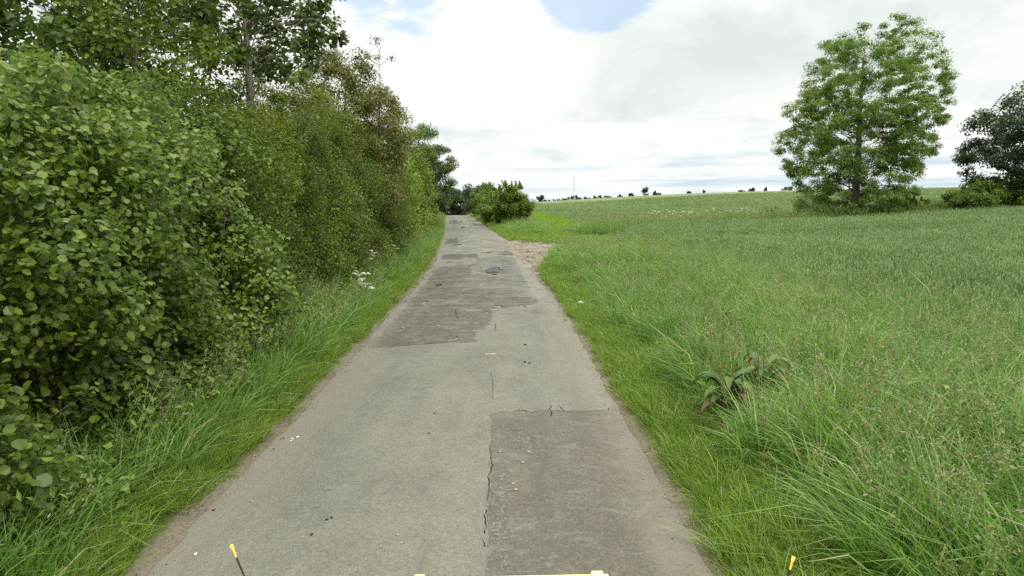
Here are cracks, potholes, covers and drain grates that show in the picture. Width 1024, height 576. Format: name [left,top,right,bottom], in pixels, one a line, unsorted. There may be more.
crack [491,375,609,417]
crack [483,445,494,547]
